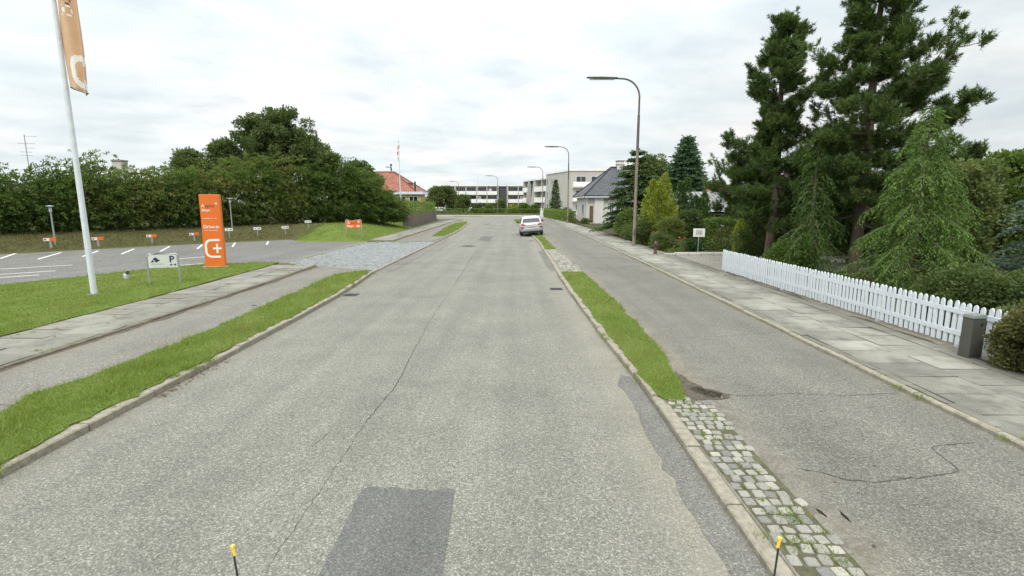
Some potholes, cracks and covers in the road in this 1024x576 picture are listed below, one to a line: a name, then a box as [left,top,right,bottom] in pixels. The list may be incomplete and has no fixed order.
crack [268,251,476,568]
pothole [690,387,722,398]
crack [796,442,972,482]
